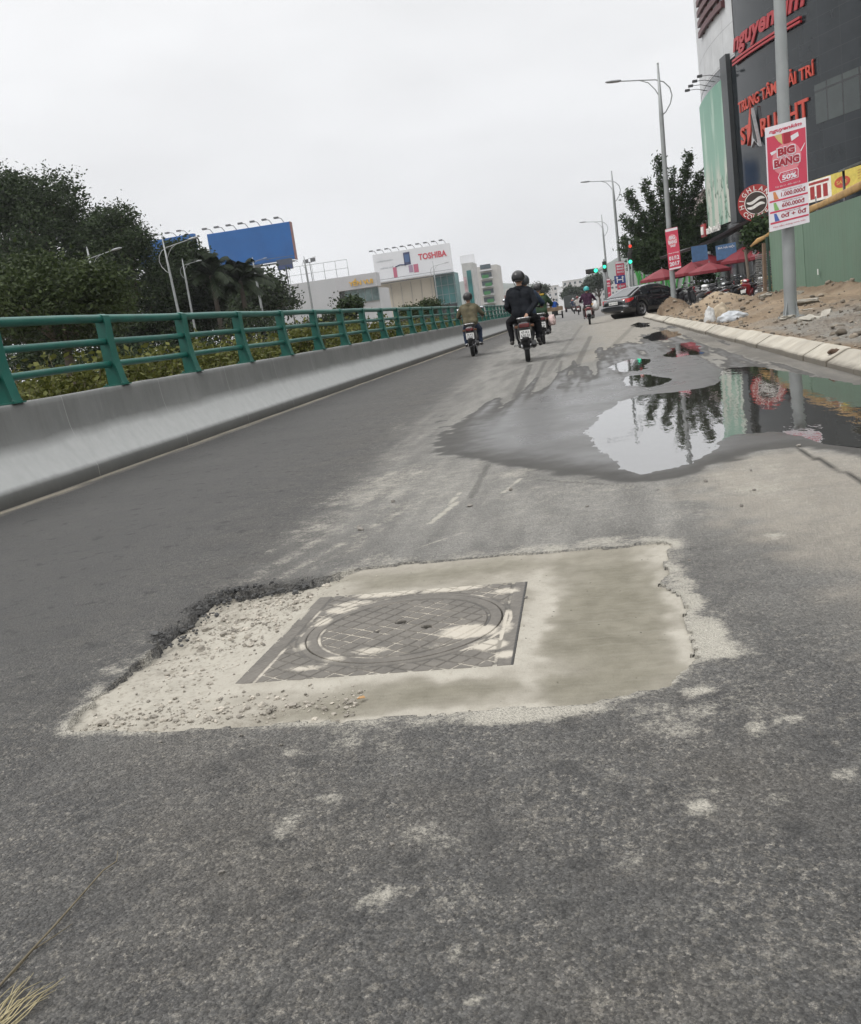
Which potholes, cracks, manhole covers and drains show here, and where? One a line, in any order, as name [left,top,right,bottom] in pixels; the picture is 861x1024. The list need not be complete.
manhole cover [235,582,527,684]
